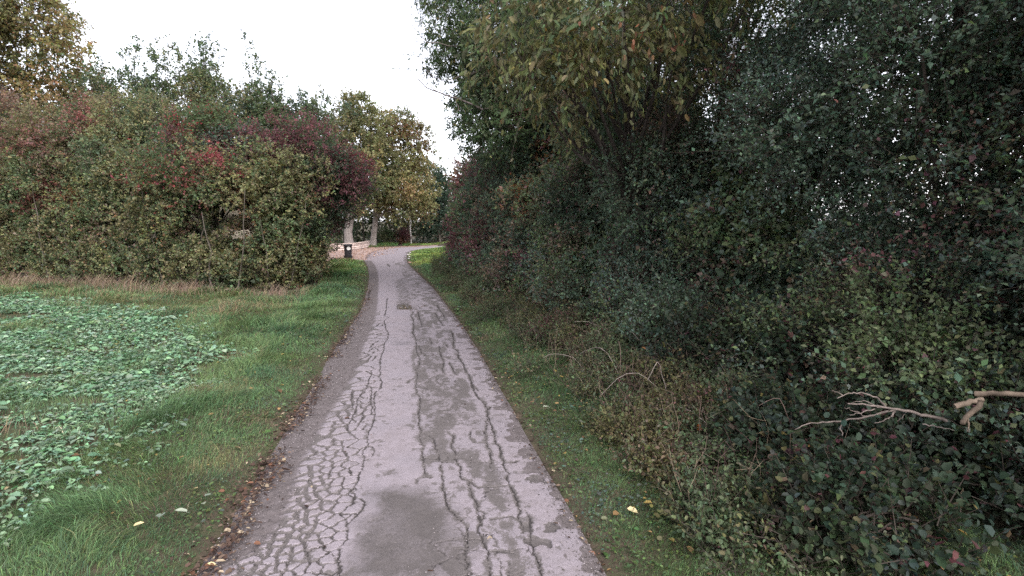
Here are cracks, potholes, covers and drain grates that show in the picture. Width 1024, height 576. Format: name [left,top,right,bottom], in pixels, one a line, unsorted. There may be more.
crack [407,305,543,576]
crack [223,289,390,576]
